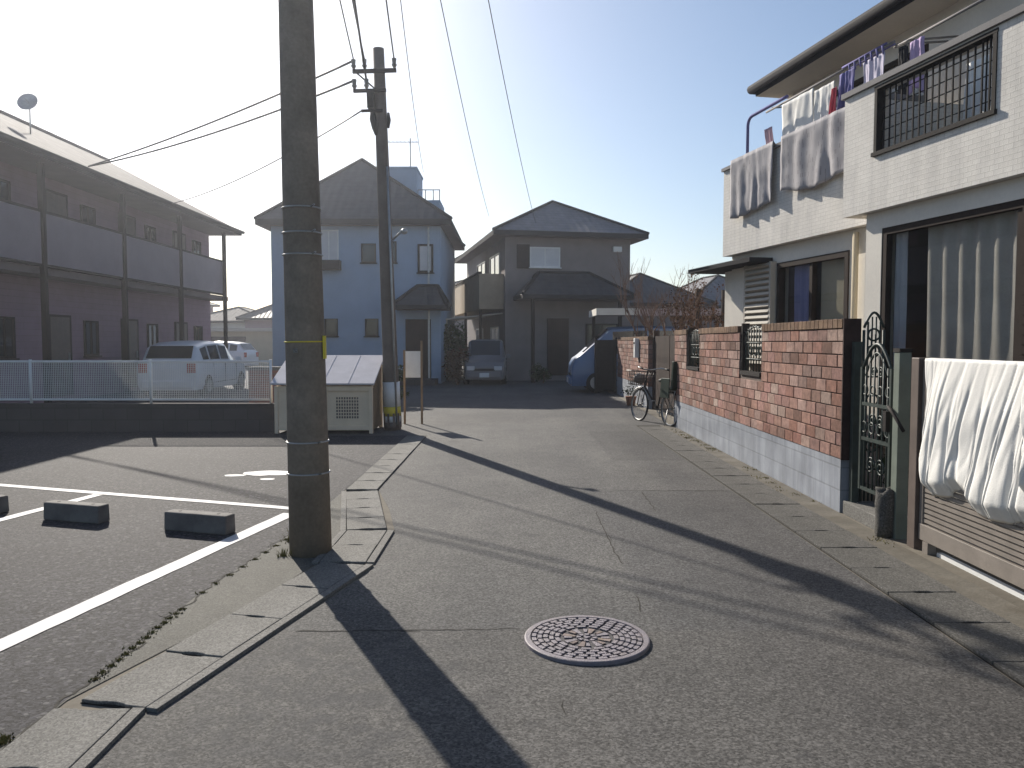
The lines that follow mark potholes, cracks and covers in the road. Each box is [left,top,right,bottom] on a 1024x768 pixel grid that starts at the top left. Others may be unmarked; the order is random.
manhole cover [524,615,650,666]
crack [596,511,623,564]
